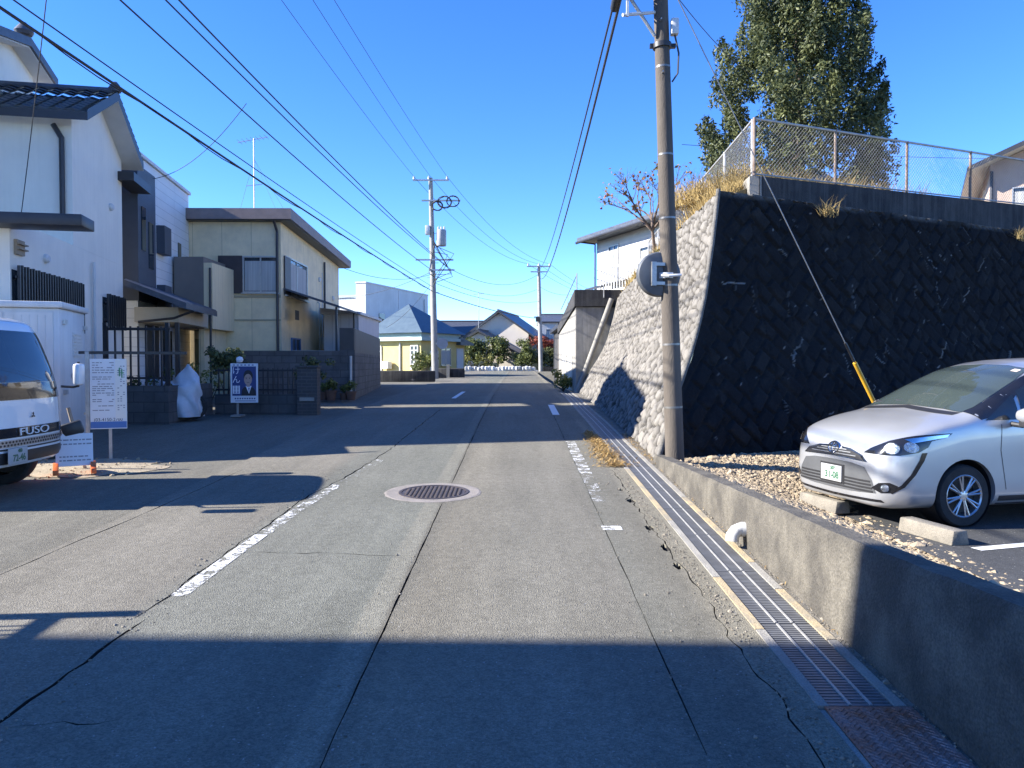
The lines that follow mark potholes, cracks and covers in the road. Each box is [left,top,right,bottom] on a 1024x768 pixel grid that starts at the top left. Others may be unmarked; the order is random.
drain grate [605,440,631,449]
manhole cover [384,483,481,503]
crack [613,471,825,768]
drain grate [599,432,622,440]
drain grate [623,459,654,472]
drain grate [632,472,671,488]
drain grate [686,535,756,572]
drain grate [761,623,893,706]
drain grate [614,449,642,460]
drain grate [646,488,692,509]
drain grate [664,508,718,535]
drain grate [716,571,809,624]
